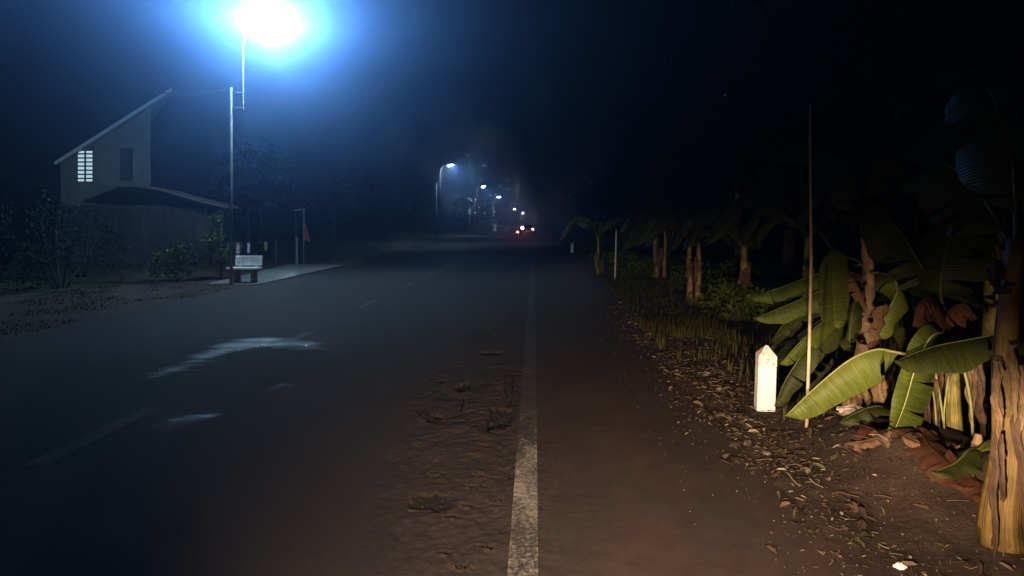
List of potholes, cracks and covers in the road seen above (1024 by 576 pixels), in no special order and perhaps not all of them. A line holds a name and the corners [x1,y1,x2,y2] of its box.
crack [411,366,518,424]
pothole [450,381,476,394]
pothole [482,405,520,432]
pothole [403,490,466,513]
